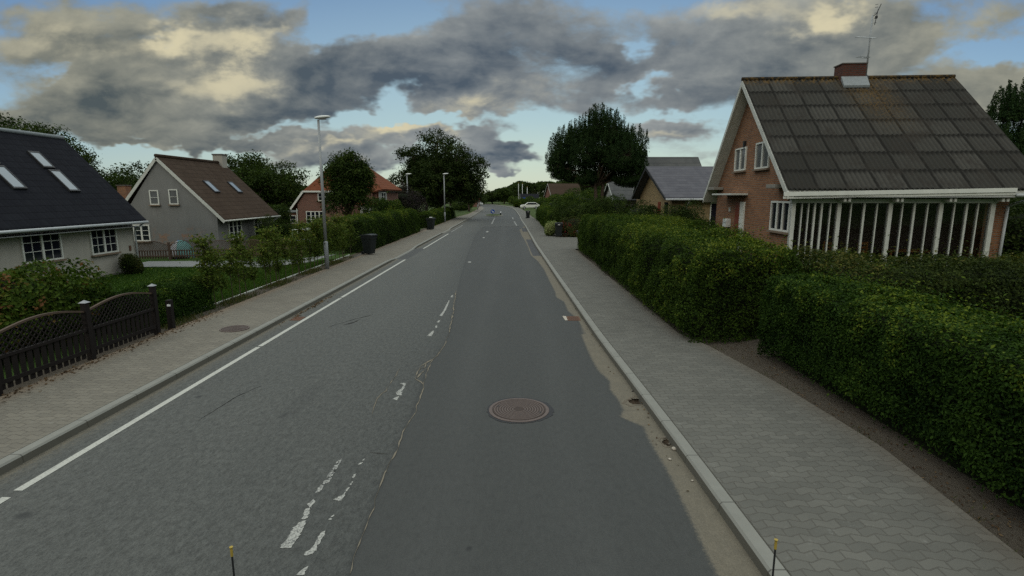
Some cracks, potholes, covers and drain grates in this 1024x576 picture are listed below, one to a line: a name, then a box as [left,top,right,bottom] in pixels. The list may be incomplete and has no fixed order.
manhole cover [487,397,554,423]
crack [350,290,457,573]
